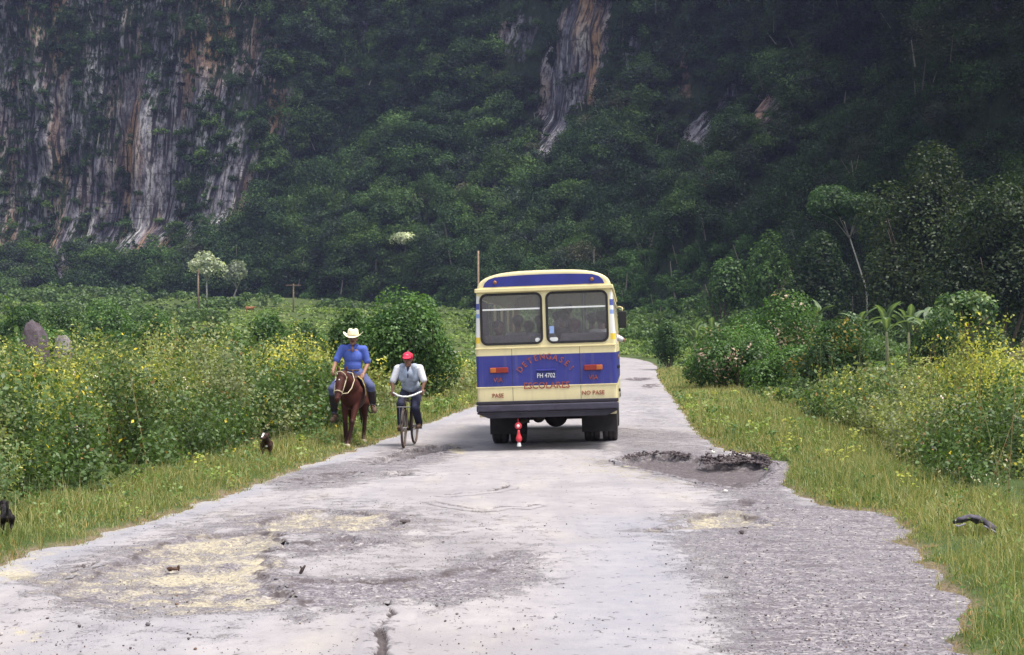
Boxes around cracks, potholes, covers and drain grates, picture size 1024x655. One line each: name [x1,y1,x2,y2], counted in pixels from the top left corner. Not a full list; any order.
crack [350,598,419,655]
pothole [609,450,782,489]
crack [419,484,547,512]
